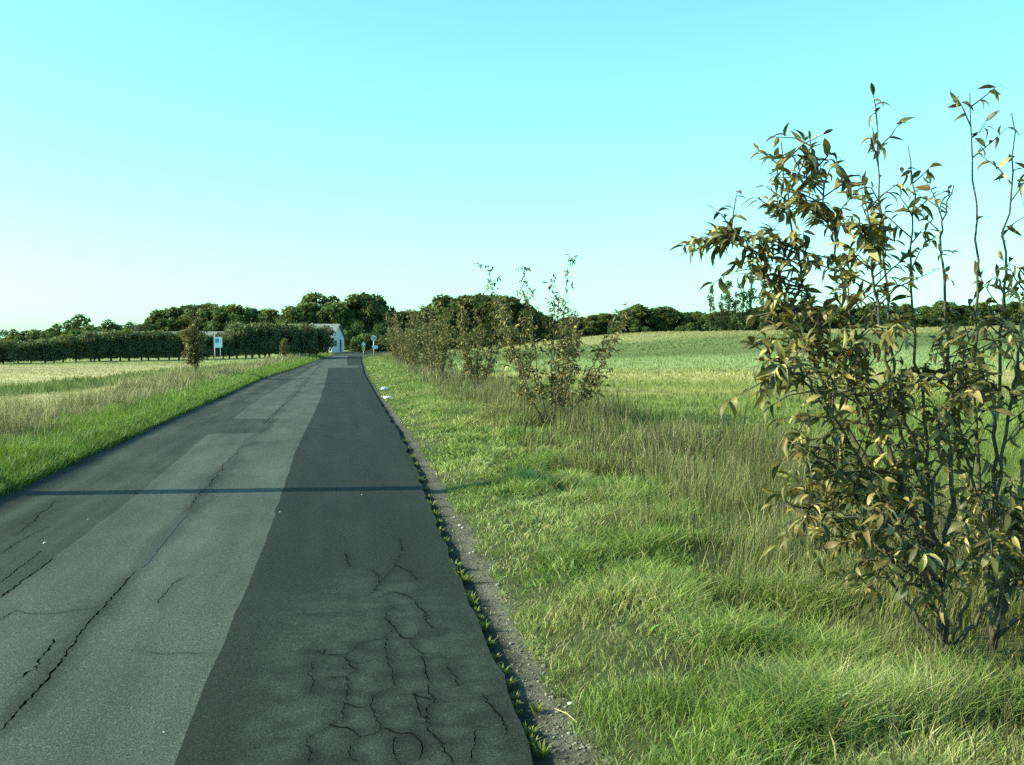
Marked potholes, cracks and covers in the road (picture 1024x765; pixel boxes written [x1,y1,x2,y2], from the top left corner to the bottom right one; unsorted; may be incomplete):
crack [1,572,134,730]
crack [2,501,55,582]
crack [306,560,508,764]
